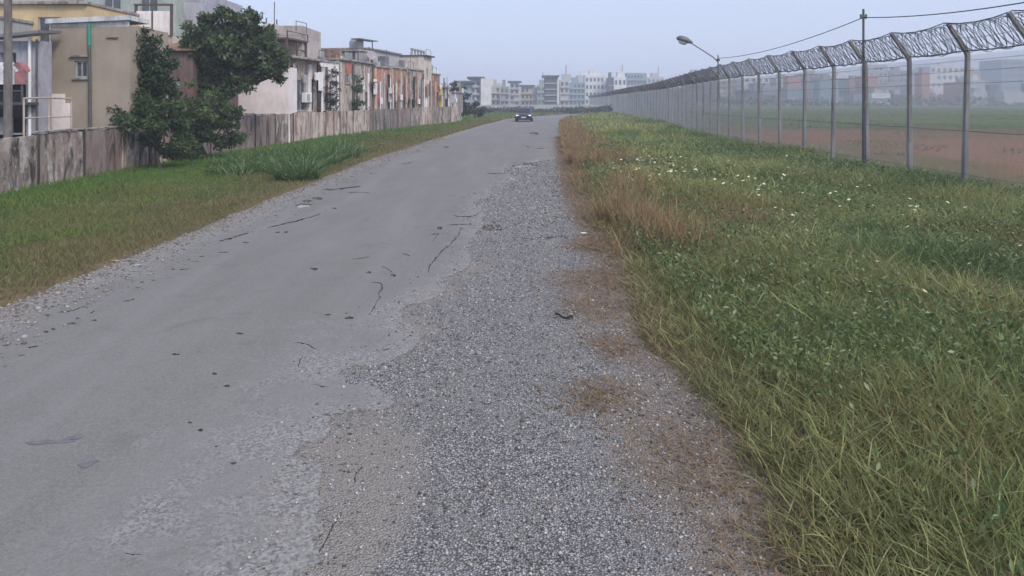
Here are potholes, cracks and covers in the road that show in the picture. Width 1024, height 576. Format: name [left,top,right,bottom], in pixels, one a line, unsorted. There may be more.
crack [428,211,482,272]
crack [357,254,409,310]
